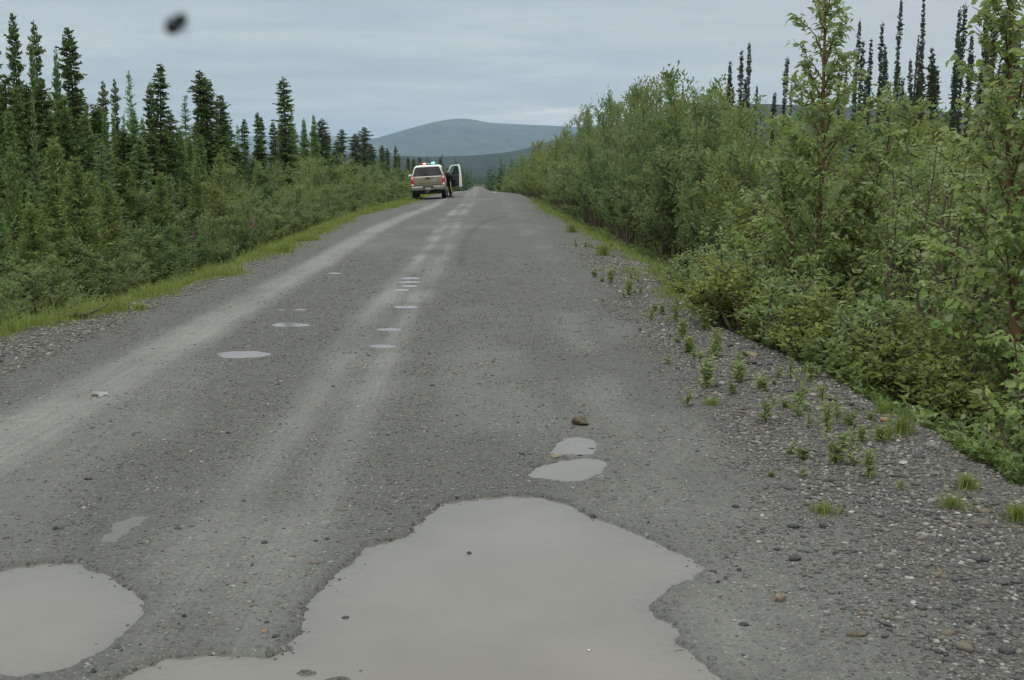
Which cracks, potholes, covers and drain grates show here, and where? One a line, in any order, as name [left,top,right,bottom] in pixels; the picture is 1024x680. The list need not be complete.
pothole [0,552,177,680]
pothole [531,432,617,457]
pothole [79,488,762,680]
pothole [207,349,283,359]
pothole [508,454,626,486]
